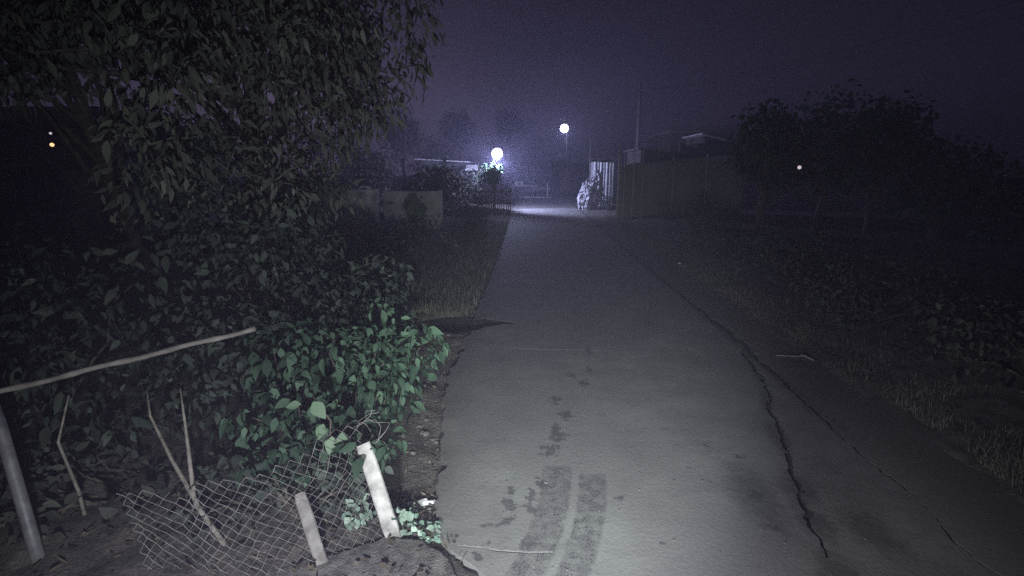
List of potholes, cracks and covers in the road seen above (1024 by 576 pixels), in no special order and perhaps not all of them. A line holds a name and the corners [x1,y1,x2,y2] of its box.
crack [613,241,1000,576]
